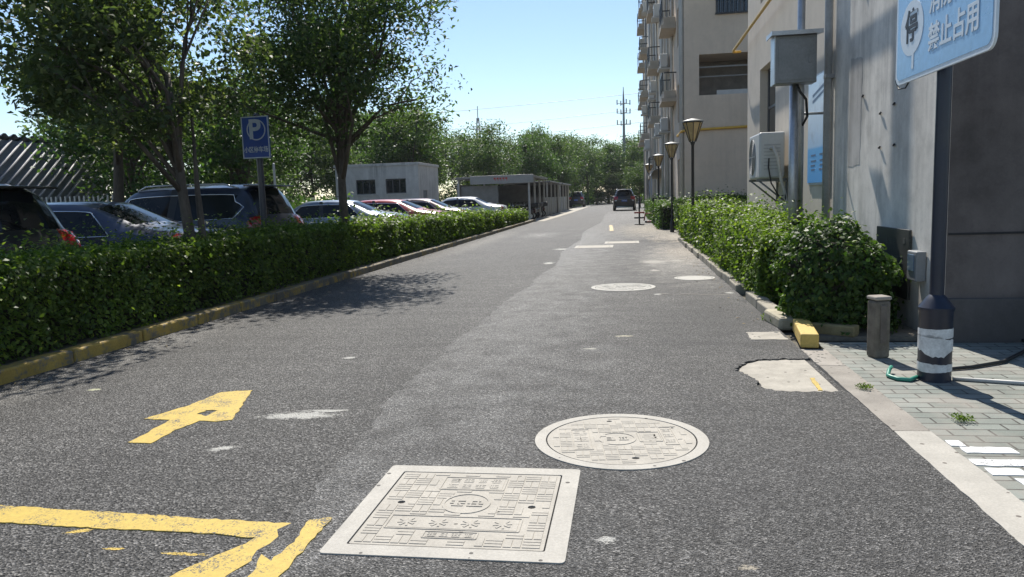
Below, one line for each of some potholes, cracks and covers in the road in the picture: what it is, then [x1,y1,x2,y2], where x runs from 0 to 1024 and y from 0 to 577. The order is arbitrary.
manhole cover [320,465,580,564]
manhole cover [591,283,655,291]
manhole cover [535,414,709,470]
